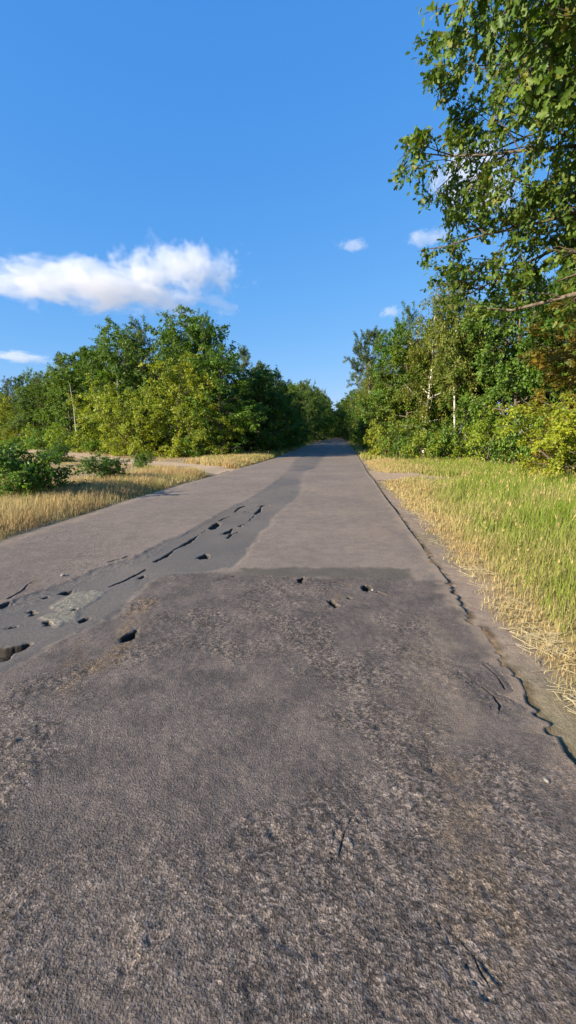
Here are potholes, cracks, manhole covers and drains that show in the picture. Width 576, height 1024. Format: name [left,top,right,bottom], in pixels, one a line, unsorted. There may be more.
pothole [193,553,213,561]
pothole [113,627,143,644]
pothole [205,522,224,531]
pothole [322,598,344,609]
crack [431,902,511,1012]
crack [327,806,371,867]
crack [456,661,526,719]
pothole [0,640,38,665]
pothole [291,575,309,585]
crack [102,505,273,589]
pothole [72,616,95,625]
crack [1,579,41,601]
